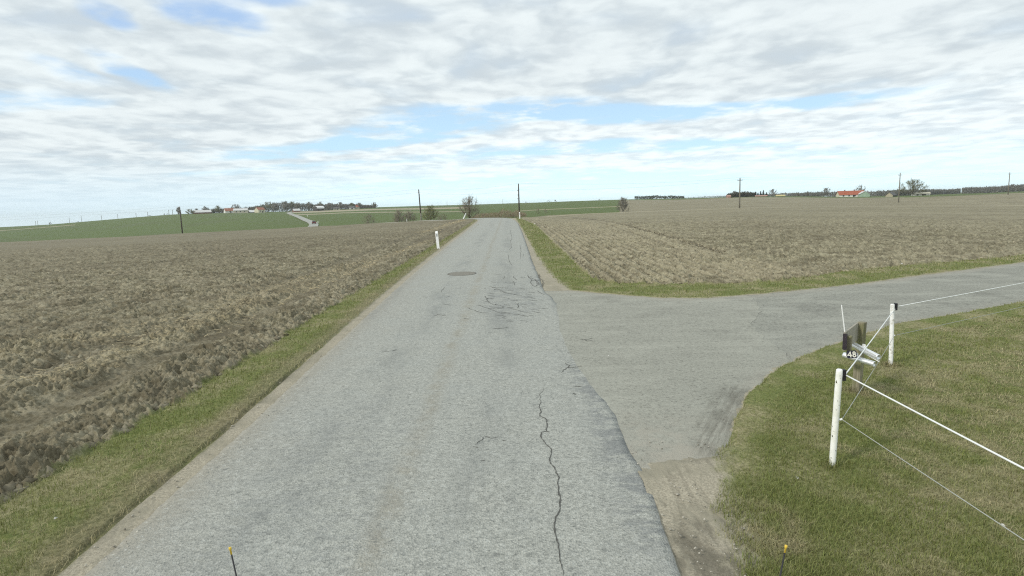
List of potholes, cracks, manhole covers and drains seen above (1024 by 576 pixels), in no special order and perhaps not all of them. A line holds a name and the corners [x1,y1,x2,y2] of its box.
crack [539,391,564,575]
crack [435,231,546,329]
